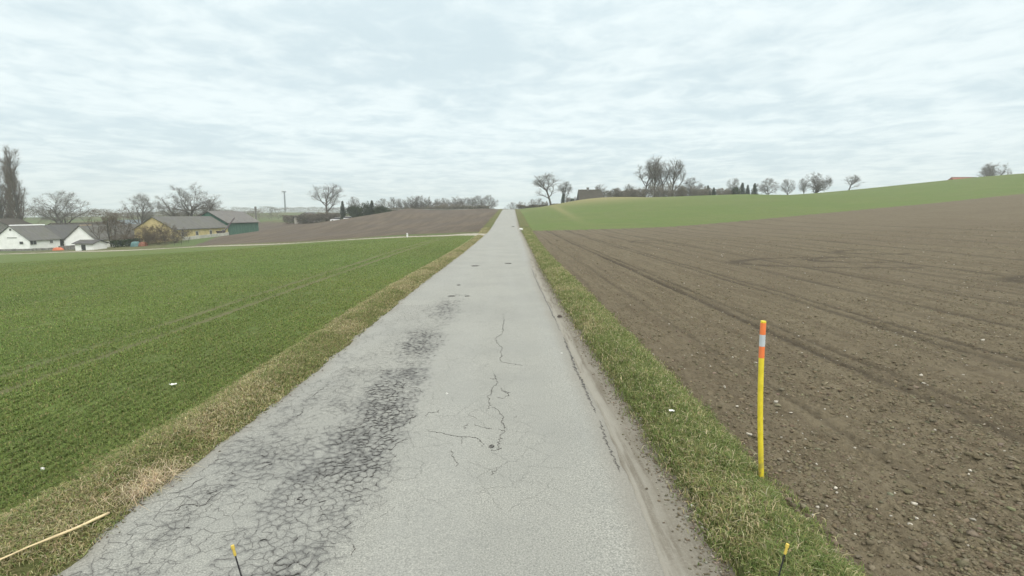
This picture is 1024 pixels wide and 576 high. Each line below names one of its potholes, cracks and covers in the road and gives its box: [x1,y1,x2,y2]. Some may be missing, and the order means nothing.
crack [69,295,566,576]
